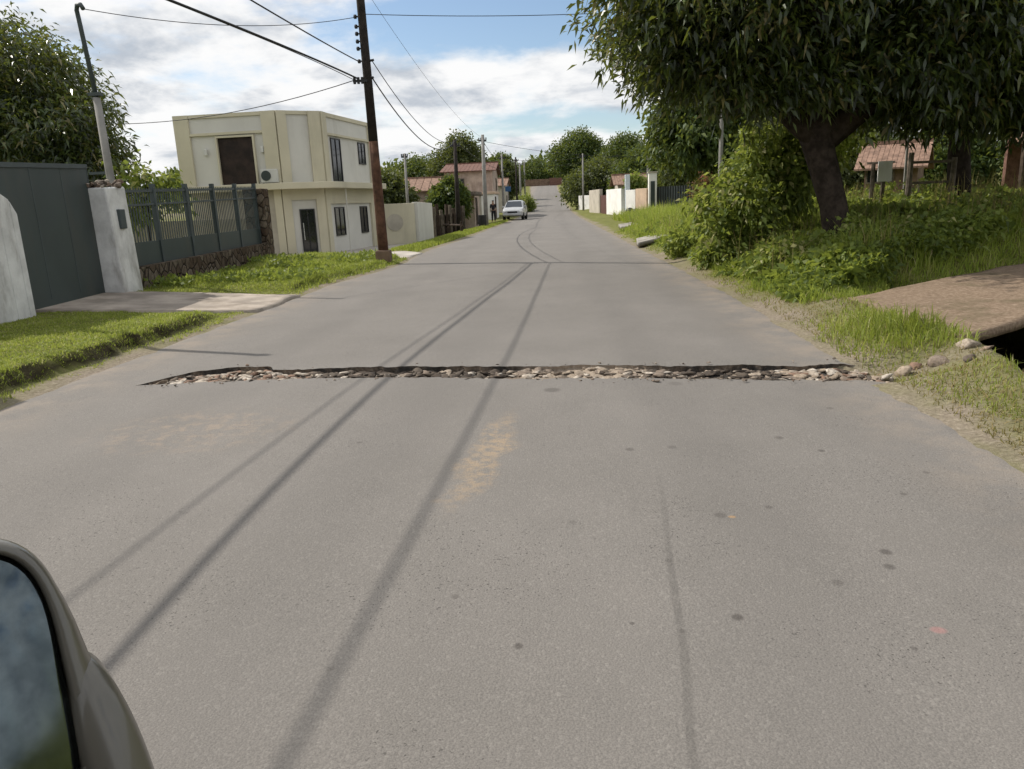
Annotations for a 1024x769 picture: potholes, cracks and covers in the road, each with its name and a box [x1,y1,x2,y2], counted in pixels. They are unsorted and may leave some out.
pothole [141,357,909,387]
